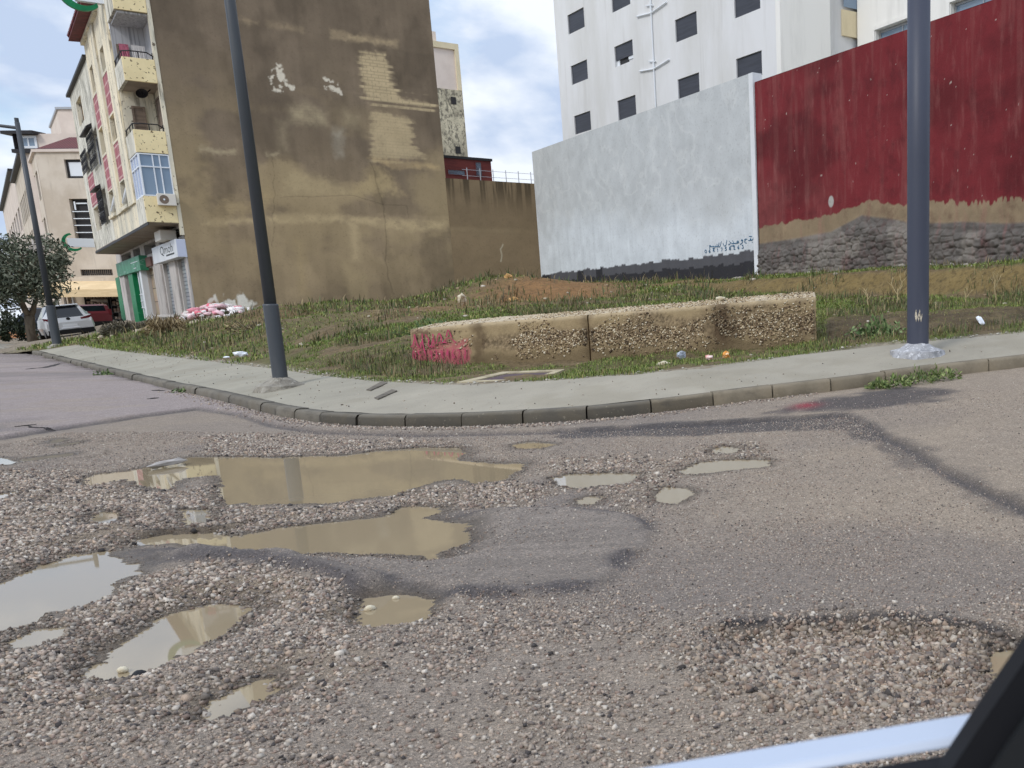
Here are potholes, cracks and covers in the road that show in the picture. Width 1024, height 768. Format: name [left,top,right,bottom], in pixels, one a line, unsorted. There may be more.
pothole [641,483,712,507]
pothole [93,500,499,562]
pothole [535,469,648,491]
pothole [685,608,990,706]
pothole [0,544,185,634]
pothole [663,456,783,477]
pothole [305,568,476,630]
pothole [949,621,1024,692]
pothole [60,443,544,508]
manhole cover [457,369,565,383]
pothole [500,440,566,451]
pothole [18,586,293,690]
